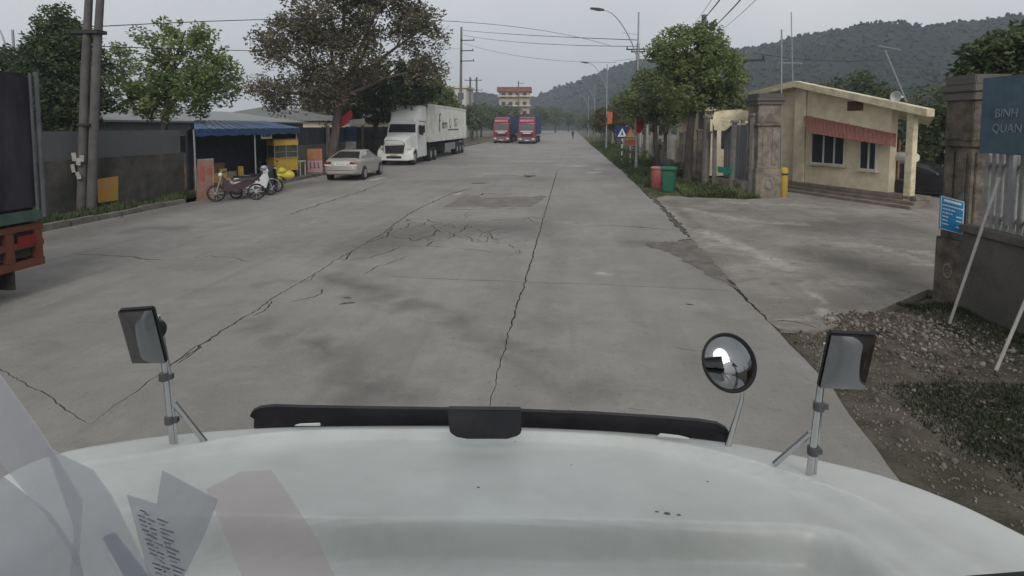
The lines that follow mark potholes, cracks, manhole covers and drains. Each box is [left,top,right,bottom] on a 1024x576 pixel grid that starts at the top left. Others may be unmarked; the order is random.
crack [342,175,548,274]
